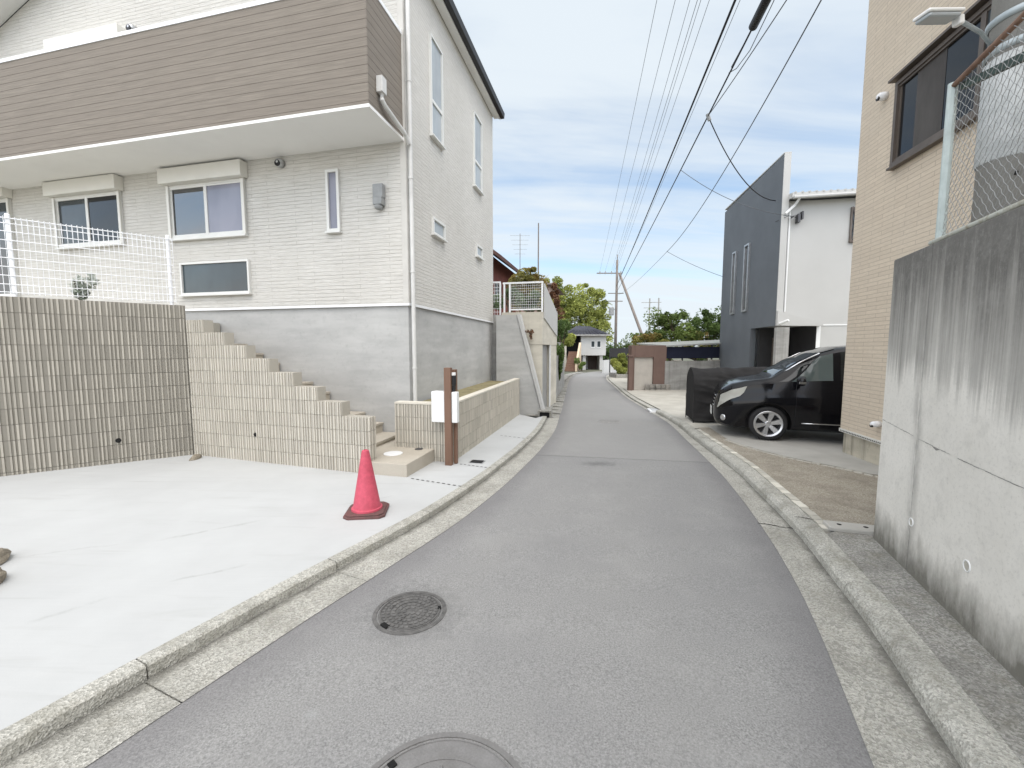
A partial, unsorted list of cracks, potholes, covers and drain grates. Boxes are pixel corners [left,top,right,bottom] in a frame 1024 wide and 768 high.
manhole cover [371,732,521,768]
manhole cover [372,591,447,636]
